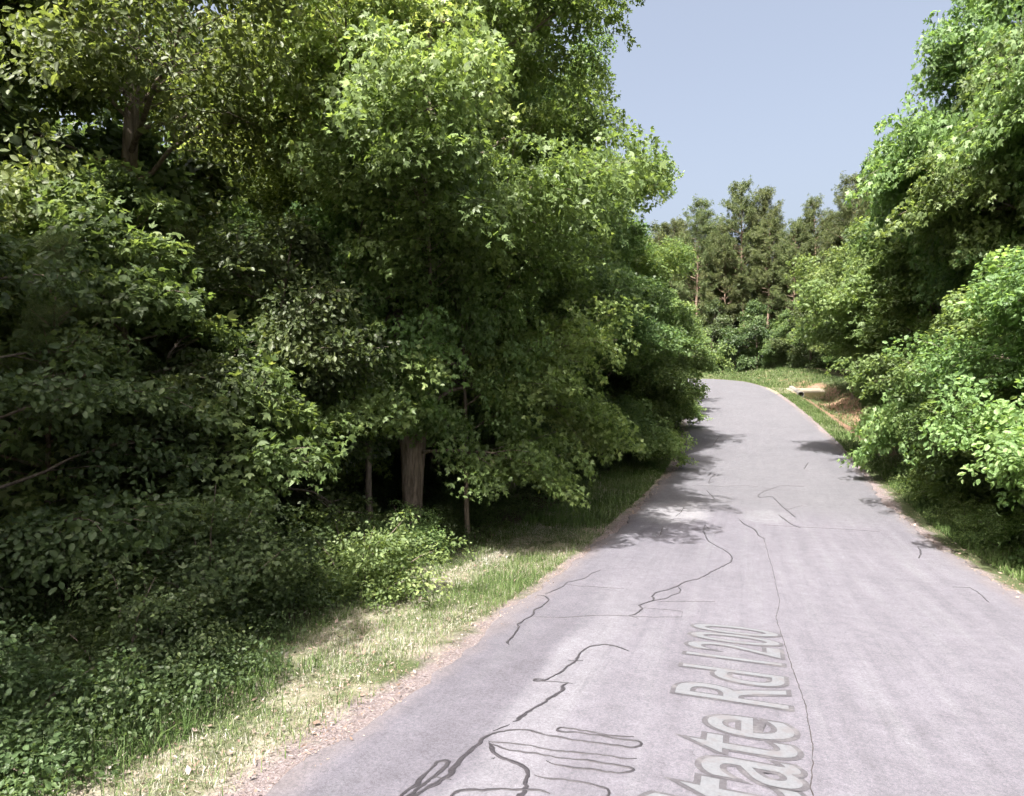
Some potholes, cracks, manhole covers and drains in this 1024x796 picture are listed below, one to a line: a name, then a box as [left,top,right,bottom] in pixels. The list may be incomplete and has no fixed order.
crack [696,463,880,539]
